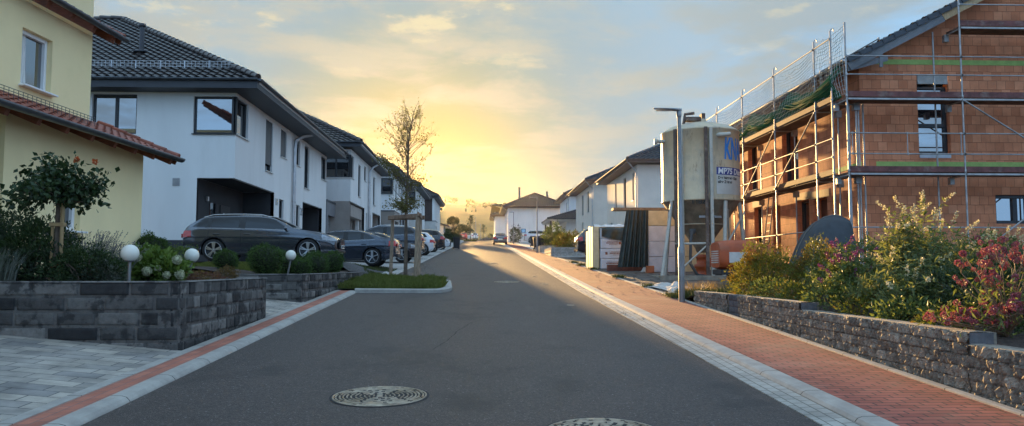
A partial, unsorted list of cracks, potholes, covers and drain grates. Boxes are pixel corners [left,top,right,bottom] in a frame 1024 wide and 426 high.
manhole cover [546,418,653,426]
manhole cover [329,386,429,407]
